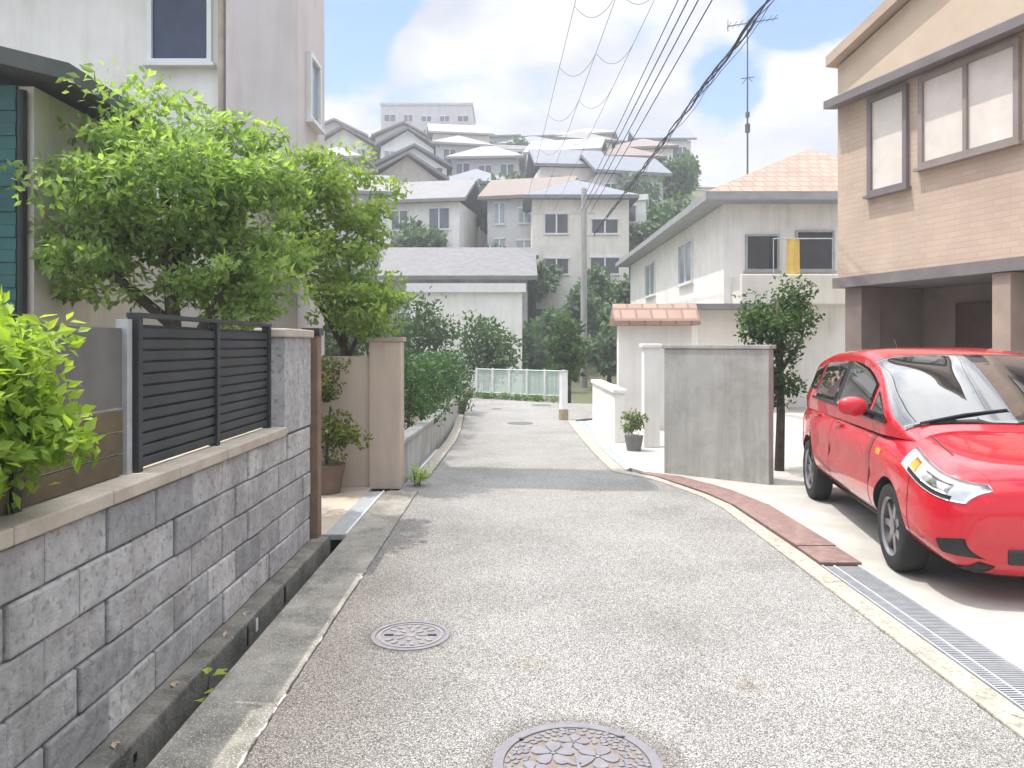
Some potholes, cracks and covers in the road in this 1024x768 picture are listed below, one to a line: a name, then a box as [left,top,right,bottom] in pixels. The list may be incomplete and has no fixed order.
manhole cover [371,621,450,651]
drain grate [821,565,1024,711]
manhole cover [492,722,663,768]
